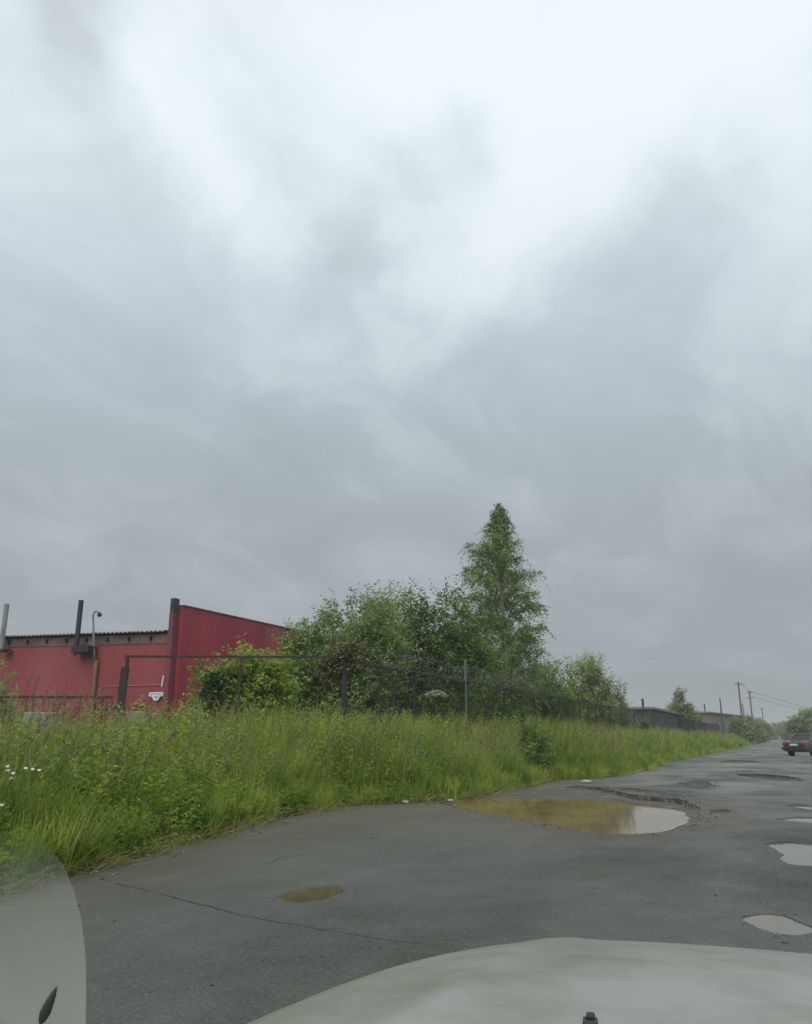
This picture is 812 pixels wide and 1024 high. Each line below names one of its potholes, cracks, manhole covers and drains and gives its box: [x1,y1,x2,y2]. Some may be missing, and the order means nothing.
pothole [439,786,702,832]
crack [105,880,468,948]
pothole [678,781,715,789]
pothole [276,885,346,901]
